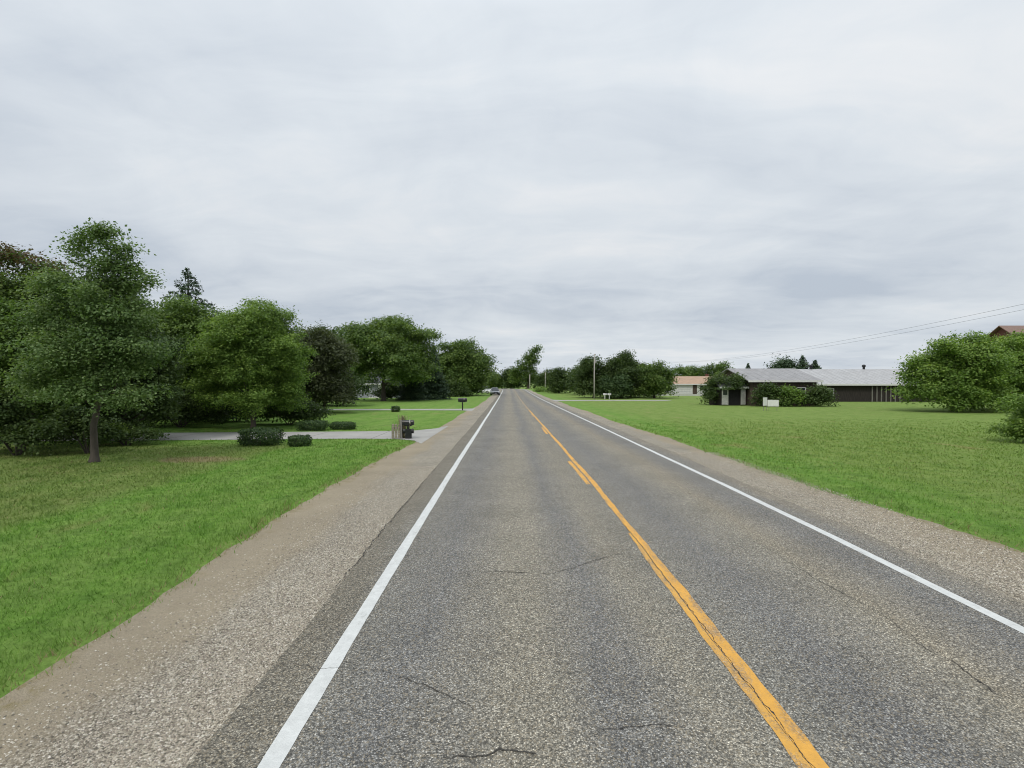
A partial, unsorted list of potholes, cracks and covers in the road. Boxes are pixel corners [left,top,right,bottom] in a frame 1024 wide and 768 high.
crack [729,526,1001,696]
crack [441,747,547,758]
crack [281,658,476,710]
